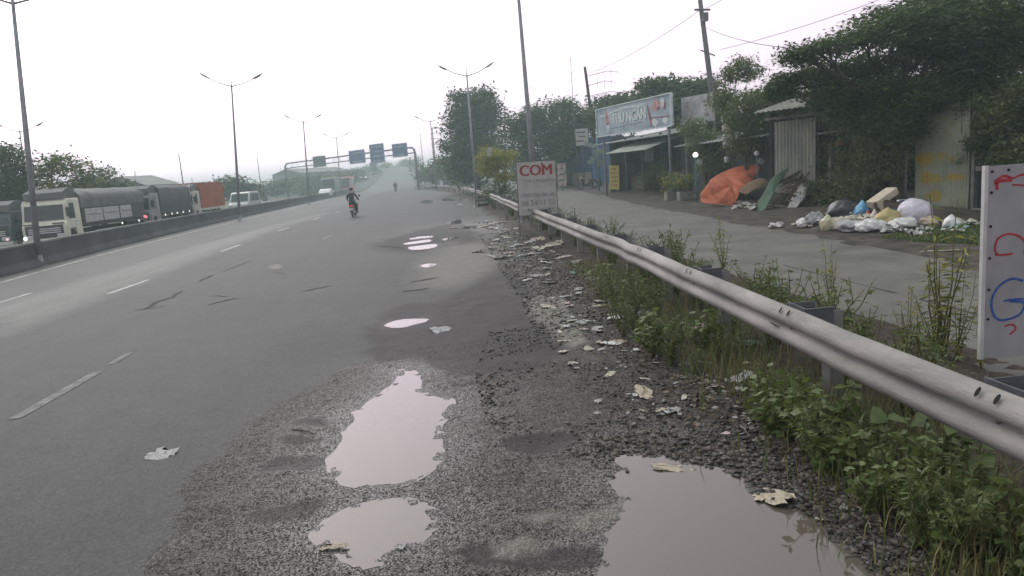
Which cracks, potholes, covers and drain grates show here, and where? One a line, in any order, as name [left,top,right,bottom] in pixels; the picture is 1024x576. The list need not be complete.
pothole [595,454,895,576]
pothole [376,317,438,330]
crack [139,291,182,310]
pothole [299,496,450,576]
crack [199,262,246,305]
pothole [322,368,460,493]
